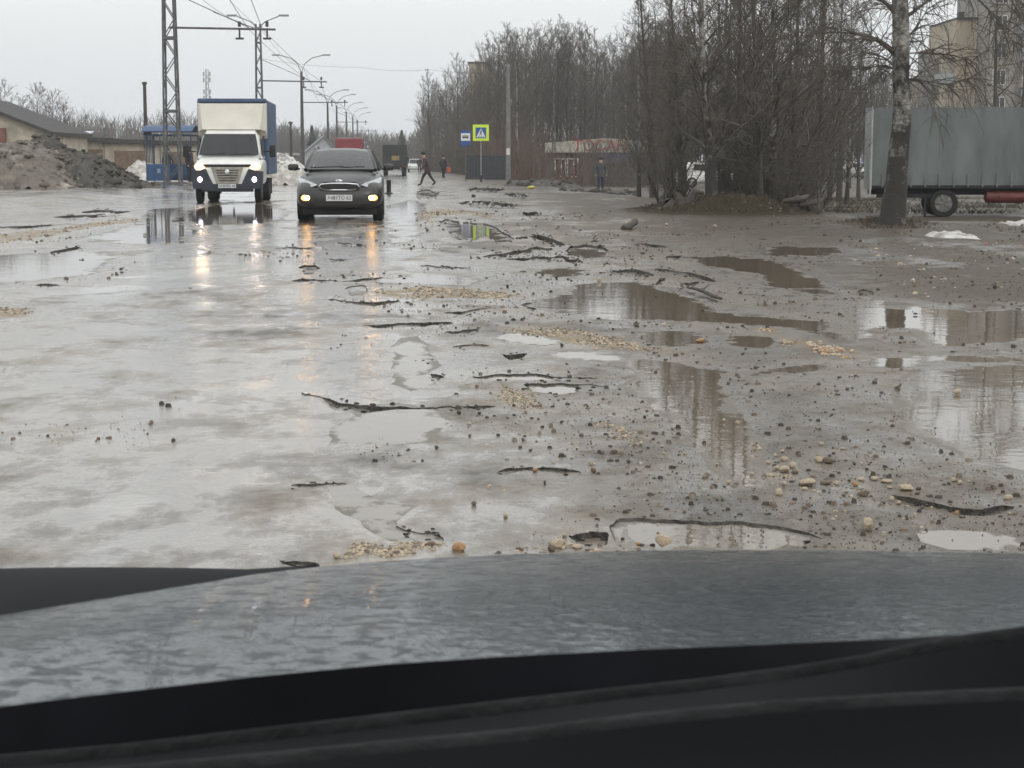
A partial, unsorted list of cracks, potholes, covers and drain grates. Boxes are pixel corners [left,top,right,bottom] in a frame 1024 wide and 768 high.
pothole [566,240,608,267]
pothole [301,393,463,415]
pothole [524,381,604,397]
pothole [458,199,518,208]
pothole [438,218,514,258]
pothole [568,531,609,546]
pothole [609,509,827,551]
pothole [529,233,566,247]
pothole [502,352,527,360]
